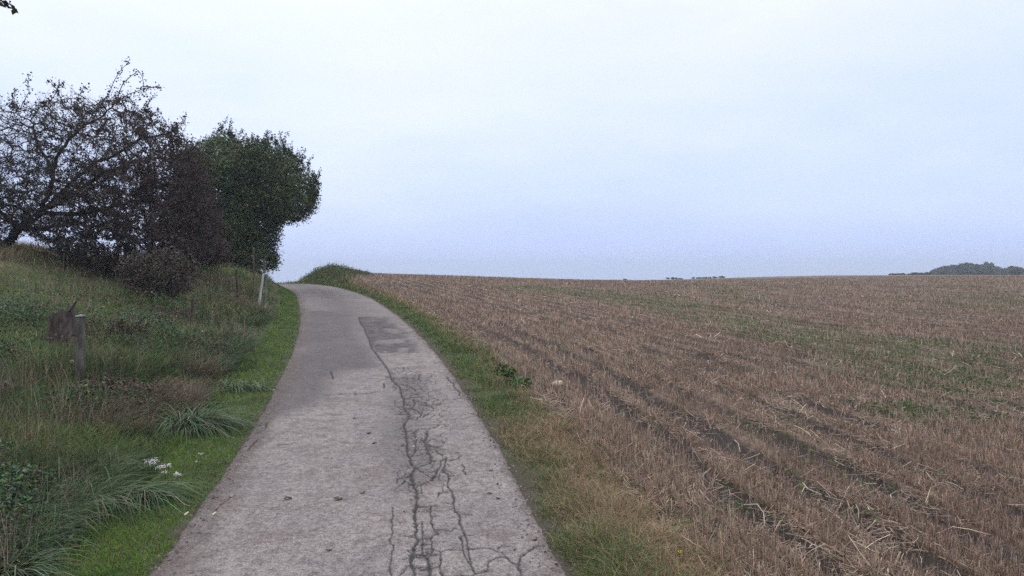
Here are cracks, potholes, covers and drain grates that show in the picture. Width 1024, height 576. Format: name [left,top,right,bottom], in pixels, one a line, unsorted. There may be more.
crack [325,317,542,576]
